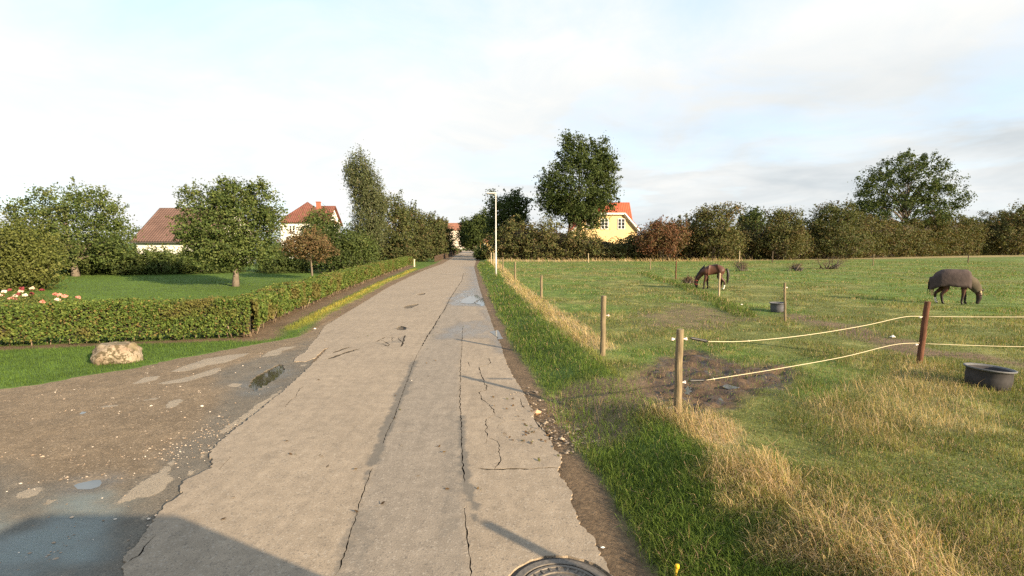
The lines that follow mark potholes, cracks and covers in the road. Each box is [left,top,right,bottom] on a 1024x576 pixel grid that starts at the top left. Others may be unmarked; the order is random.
crack [328,273,557,576]
pothole [249,365,285,391]
manhole cover [511,558,607,576]
